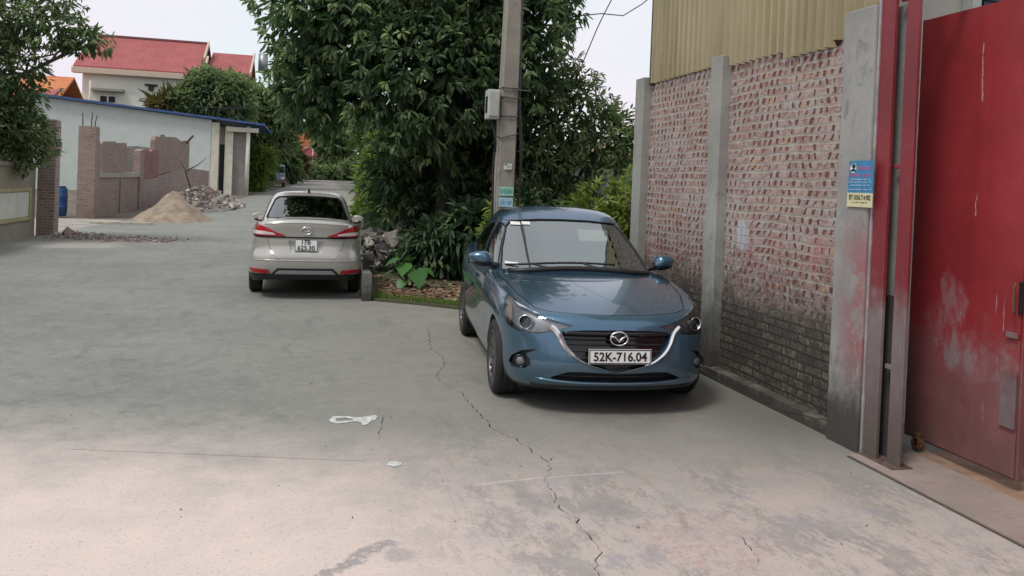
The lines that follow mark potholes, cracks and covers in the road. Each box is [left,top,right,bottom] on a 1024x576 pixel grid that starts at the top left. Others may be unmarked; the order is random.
crack [428,331,602,575]
